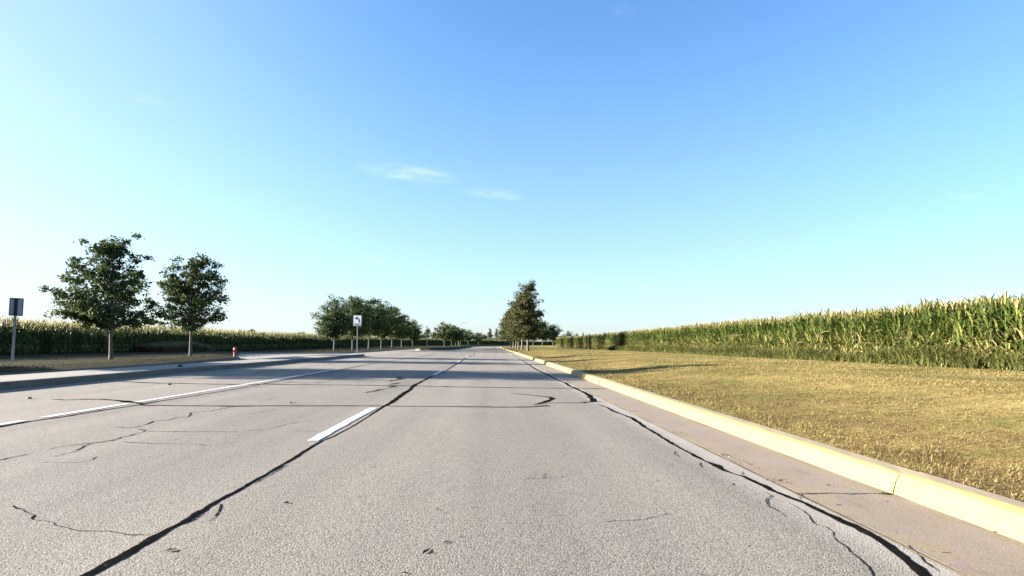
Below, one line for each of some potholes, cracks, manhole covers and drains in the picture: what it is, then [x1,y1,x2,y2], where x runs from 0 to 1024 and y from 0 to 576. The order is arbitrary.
crack [1,407,313,463]
crack [765,492,876,576]
crack [293,377,403,393]
crack [13,505,150,535]
